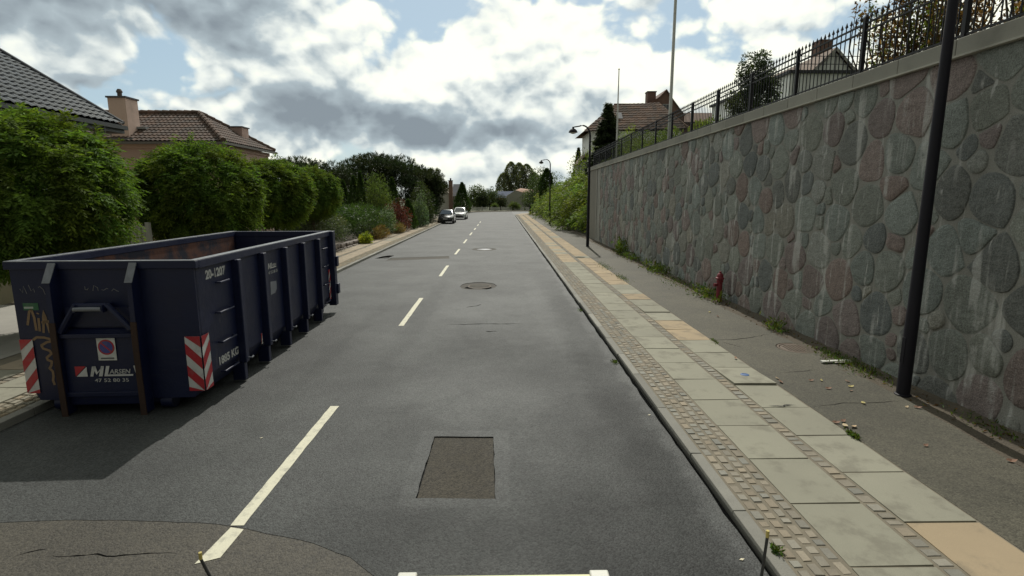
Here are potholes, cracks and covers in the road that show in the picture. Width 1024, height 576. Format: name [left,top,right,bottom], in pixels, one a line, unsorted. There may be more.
manhole cover [460,282,496,290]
crack [16,549,170,557]
manhole cover [776,343,810,353]
